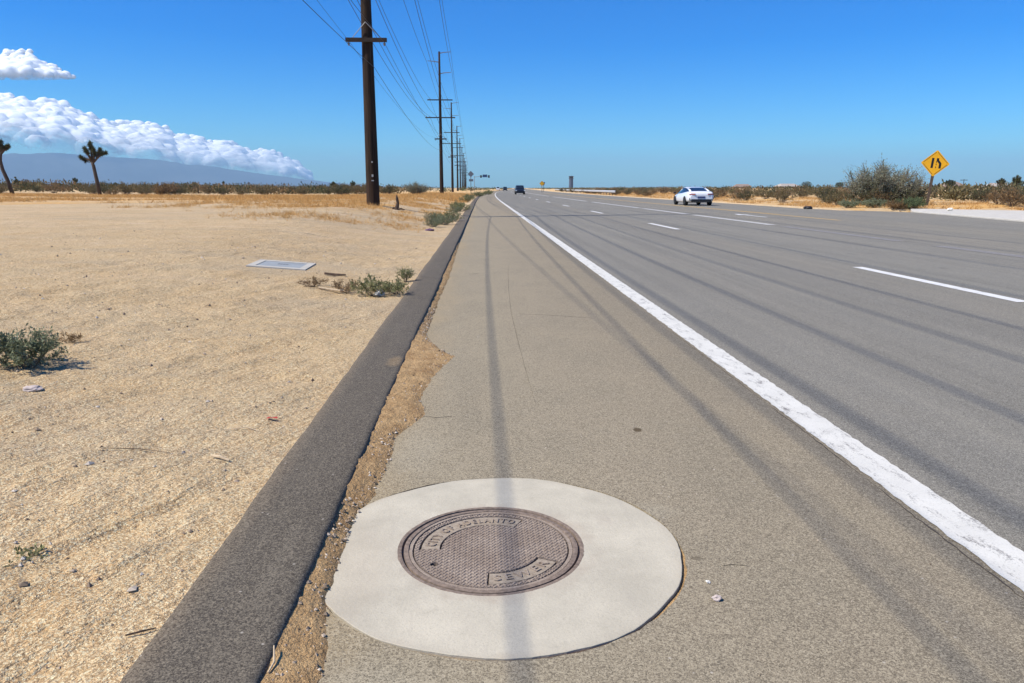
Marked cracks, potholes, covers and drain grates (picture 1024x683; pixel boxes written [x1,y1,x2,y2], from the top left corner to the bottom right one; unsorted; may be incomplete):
manhole cover [325,478,682,661]
